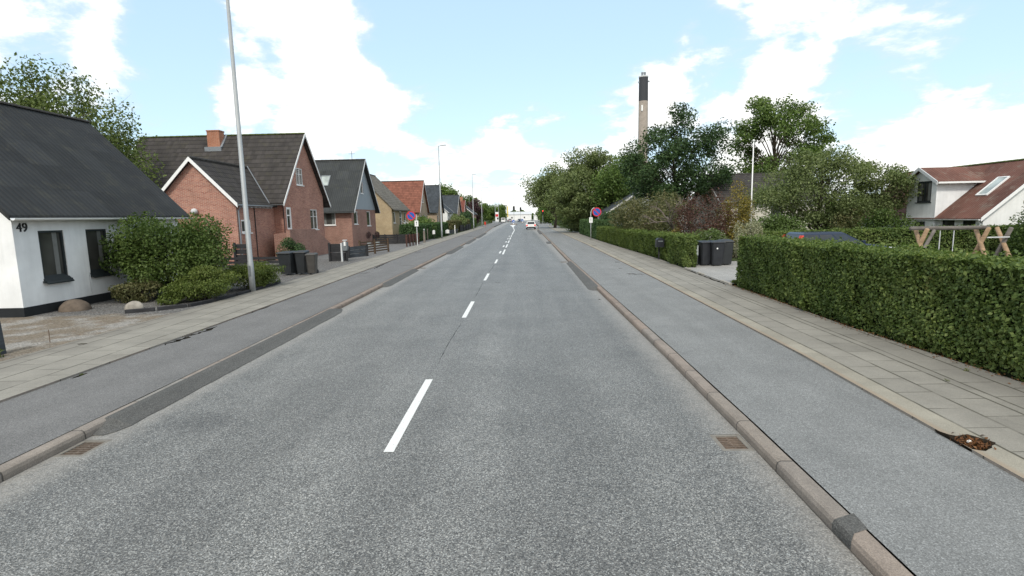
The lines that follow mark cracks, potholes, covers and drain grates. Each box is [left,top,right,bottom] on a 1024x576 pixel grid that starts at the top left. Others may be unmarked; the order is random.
drain grate [710,434,755,451]
drain grate [53,440,111,457]
pothole [934,429,995,452]
